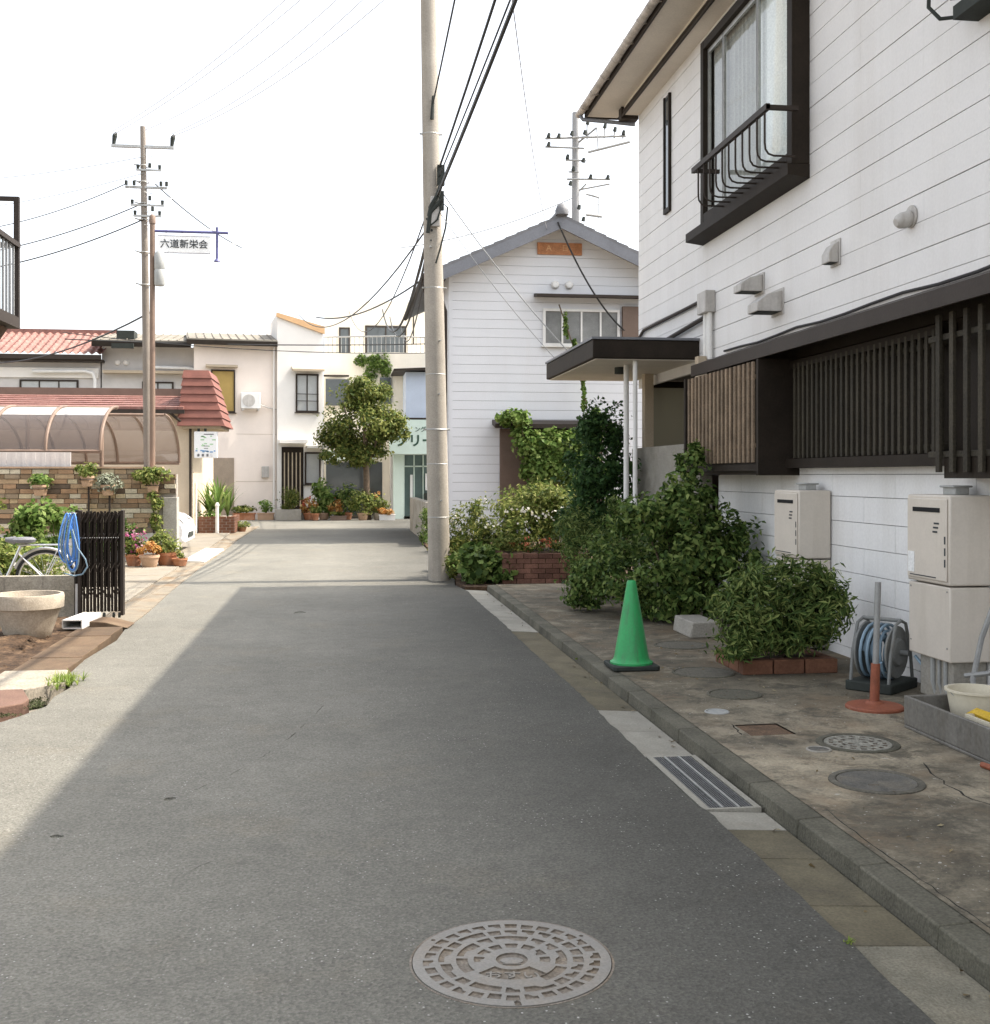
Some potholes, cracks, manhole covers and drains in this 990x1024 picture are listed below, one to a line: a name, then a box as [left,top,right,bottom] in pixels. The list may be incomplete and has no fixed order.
manhole cover [707,689,762,700]
manhole cover [828,768,926,795]
drain grate [646,755,761,813]
manhole cover [672,667,735,678]
crack [923,763,990,805]
manhole cover [816,733,901,754]
manhole cover [654,641,709,650]
crack [827,809,990,928]
manhole cover [409,920,615,1009]
